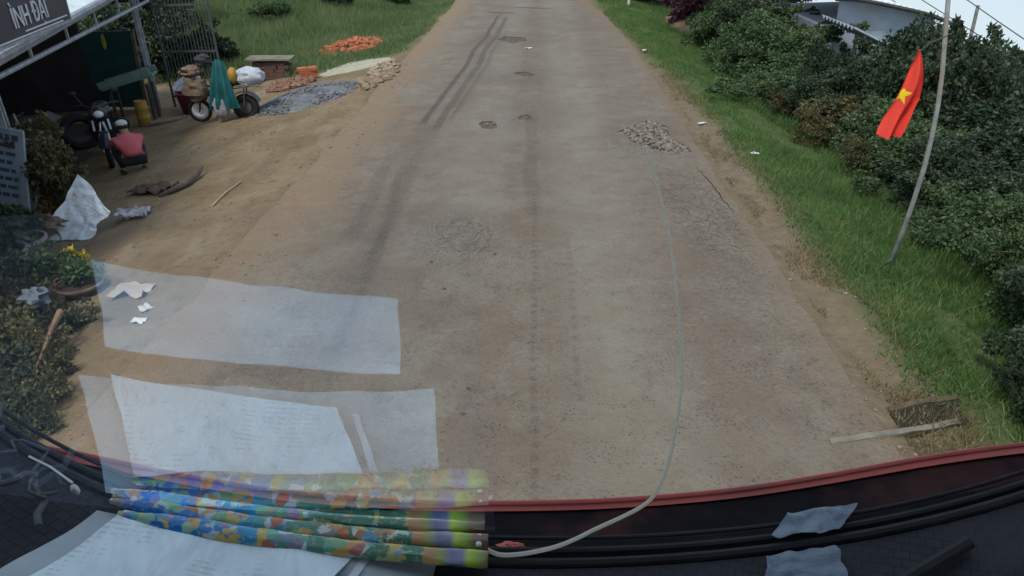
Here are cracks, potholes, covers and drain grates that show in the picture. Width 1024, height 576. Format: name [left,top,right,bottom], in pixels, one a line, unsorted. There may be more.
pothole [618,119,691,155]
crack [435,218,493,256]
crack [656,164,745,255]
pothole [479,121,497,129]
